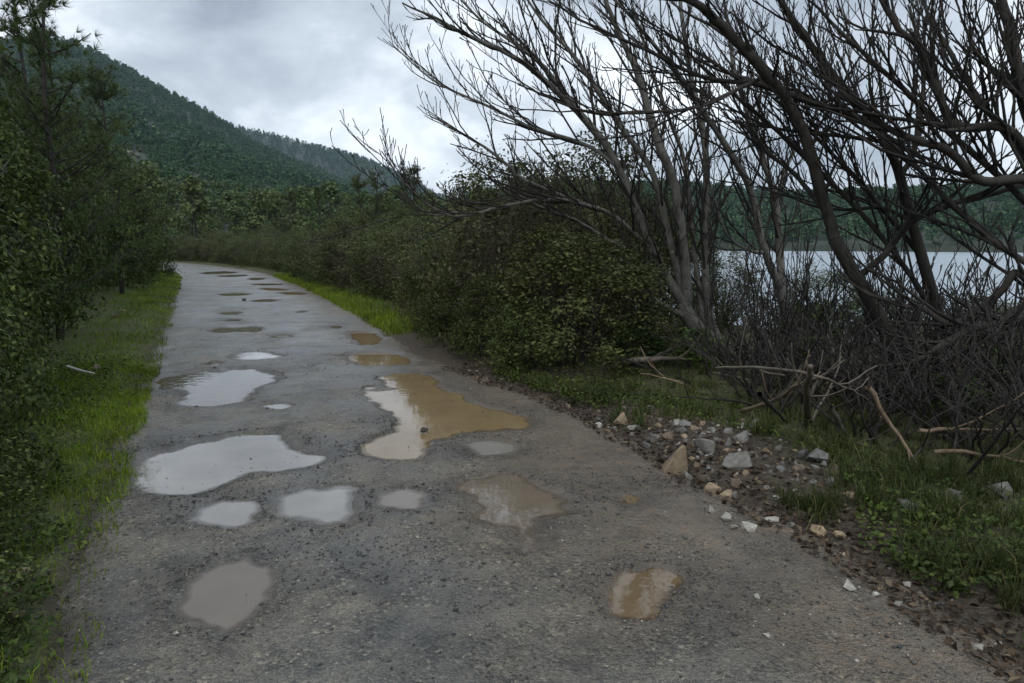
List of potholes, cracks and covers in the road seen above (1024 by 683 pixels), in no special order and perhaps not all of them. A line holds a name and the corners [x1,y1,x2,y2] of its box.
pothole [118,427,348,498]
pothole [258,482,374,531]
pothole [259,402,296,410]
pothole [444,469,587,556]
pothole [227,351,289,361]
pothole [333,349,423,366]
pothole [363,484,438,514]
pothole [174,495,270,530]
pothole [344,330,388,345]
pothole [146,365,287,407]
pothole [587,558,697,622]
pothole [160,548,290,639]
